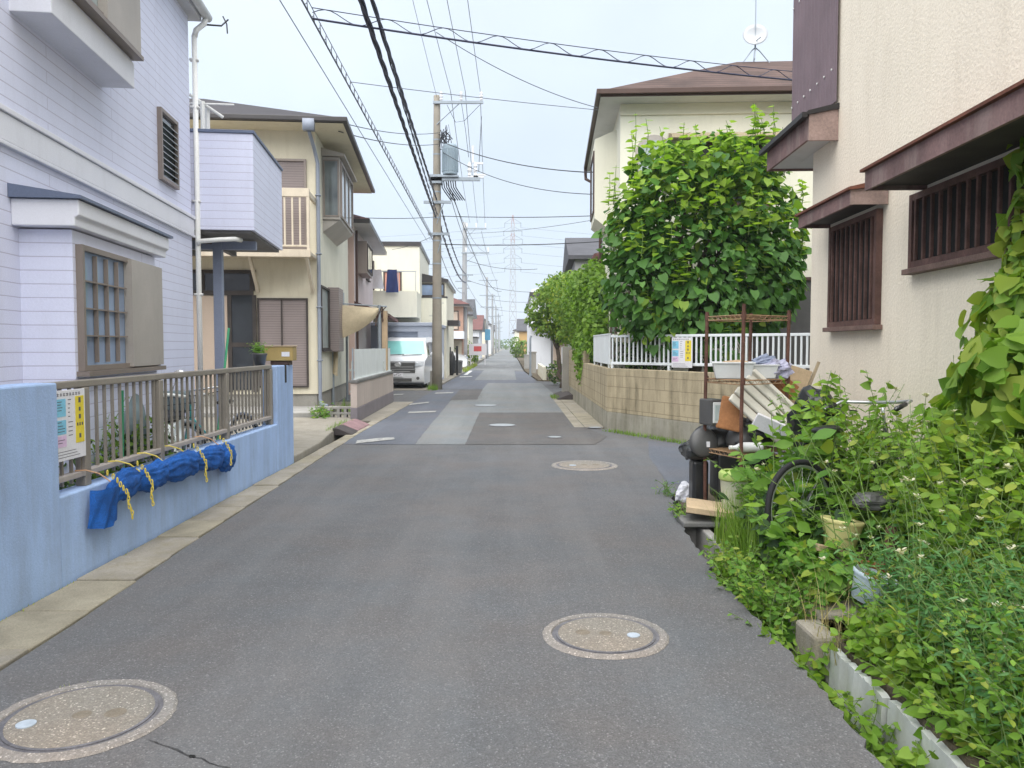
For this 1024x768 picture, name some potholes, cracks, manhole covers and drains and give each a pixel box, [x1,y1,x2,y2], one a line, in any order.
manhole cover [542,613,669,660]
manhole cover [551,460,618,471]
manhole cover [0,679,178,763]
